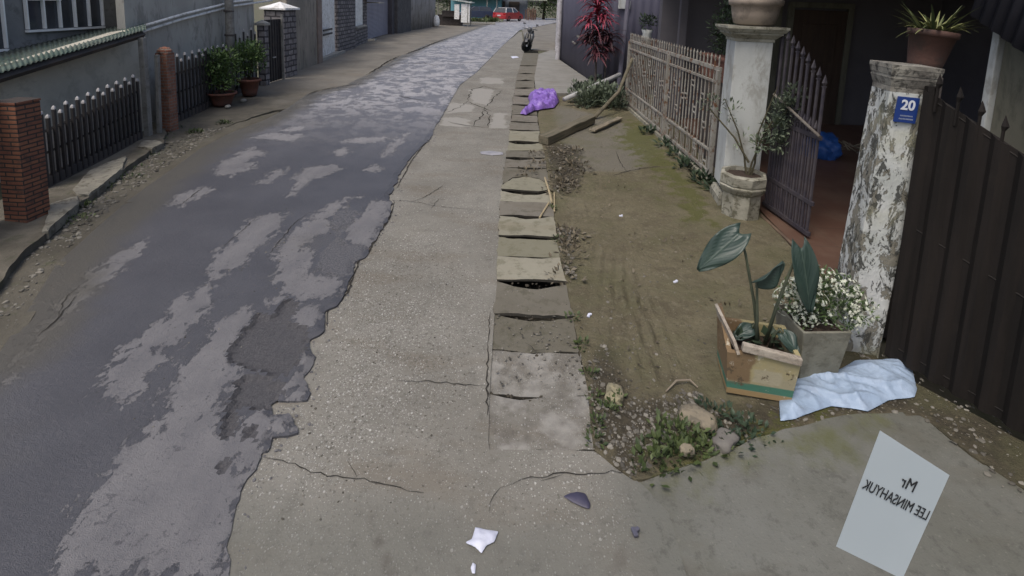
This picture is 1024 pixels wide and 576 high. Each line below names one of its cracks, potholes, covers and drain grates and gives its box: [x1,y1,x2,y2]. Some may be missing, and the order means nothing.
crack [265,457,424,493]
crack [490,470,622,502]
crack [42,286,79,332]
crack [448,86,500,128]
